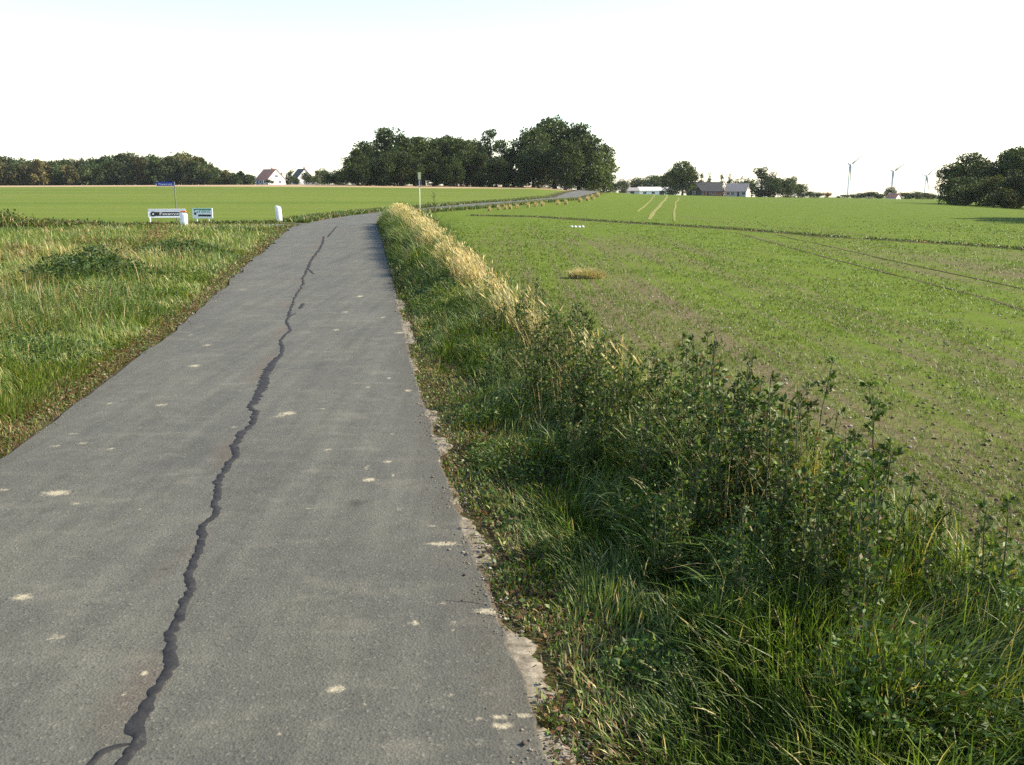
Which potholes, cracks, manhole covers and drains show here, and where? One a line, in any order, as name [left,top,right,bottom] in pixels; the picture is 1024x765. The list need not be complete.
crack [86,226,338,765]
